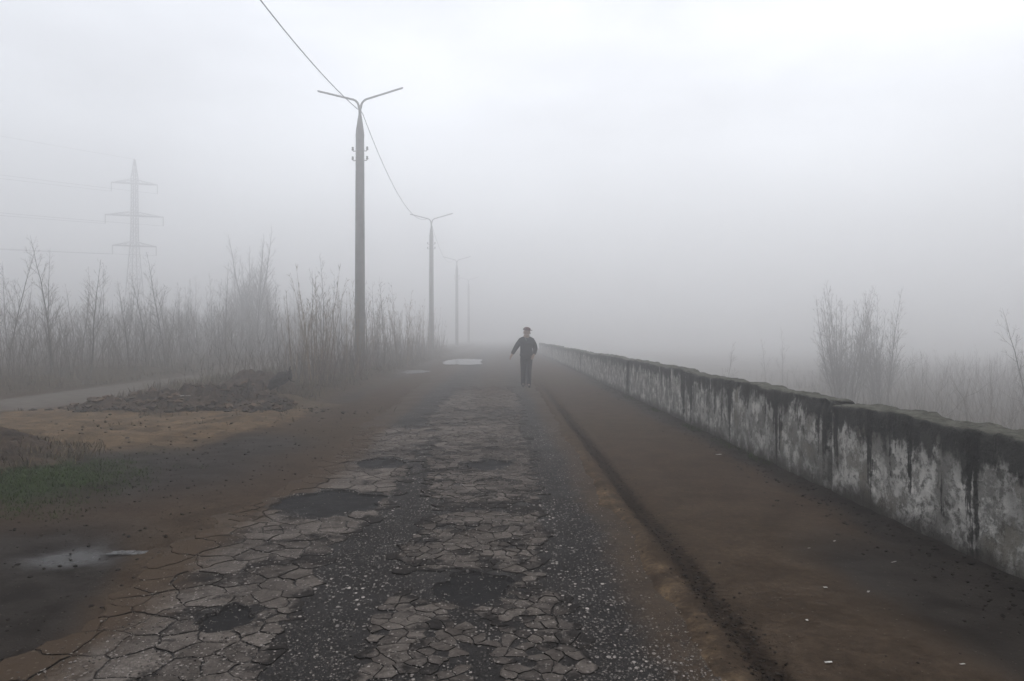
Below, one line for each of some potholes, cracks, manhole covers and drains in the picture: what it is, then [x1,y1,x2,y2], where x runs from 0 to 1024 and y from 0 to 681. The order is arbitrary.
pothole [419,569,522,611]
pothole [352,457,412,470]
pothole [264,489,394,519]
pothole [189,600,268,639]
pothole [459,459,515,472]
crack [9,385,599,681]
